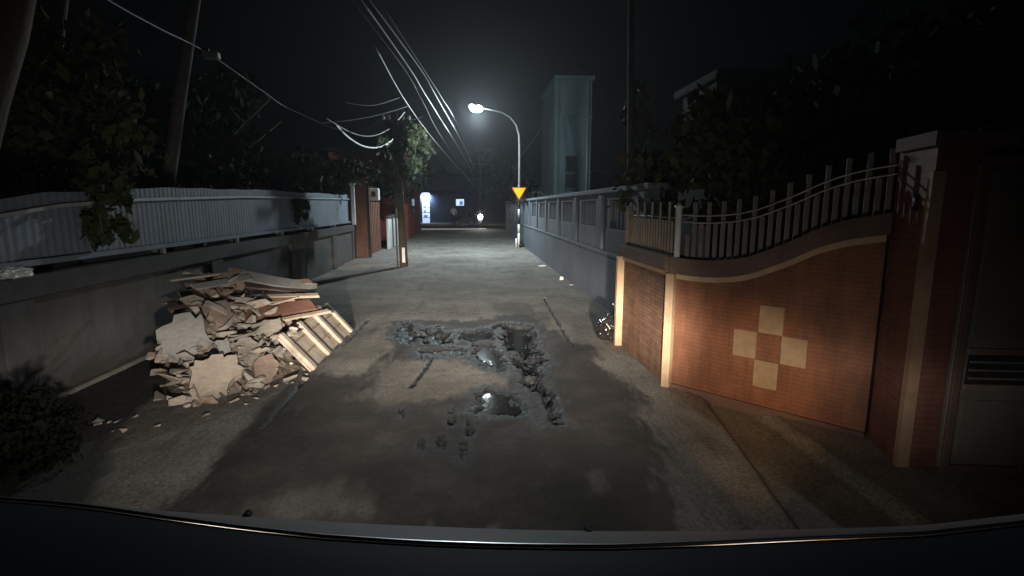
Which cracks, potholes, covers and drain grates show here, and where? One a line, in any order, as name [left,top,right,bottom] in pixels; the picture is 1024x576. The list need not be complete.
pothole [468,387,531,417]
pothole [436,433,450,452]
pothole [413,325,456,345]
crack [411,359,433,388]
pothole [496,322,568,426]
pothole [453,322,502,342]
pothole [466,418,476,437]
crack [342,297,587,347]
pothole [445,405,457,427]
pothole [417,437,428,454]
pothole [469,342,513,374]
pothole [393,321,423,345]
